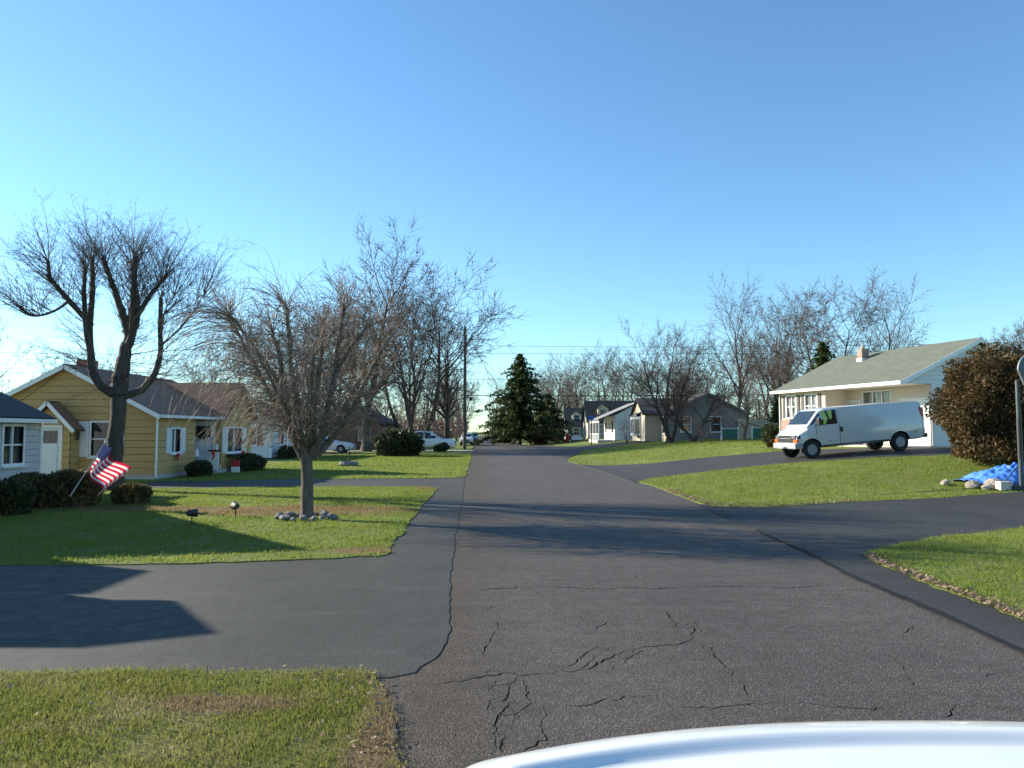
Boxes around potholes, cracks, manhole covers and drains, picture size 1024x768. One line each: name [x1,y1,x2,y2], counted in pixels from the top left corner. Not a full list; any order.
crack [425,606,884,761]
crack [458,567,828,591]
